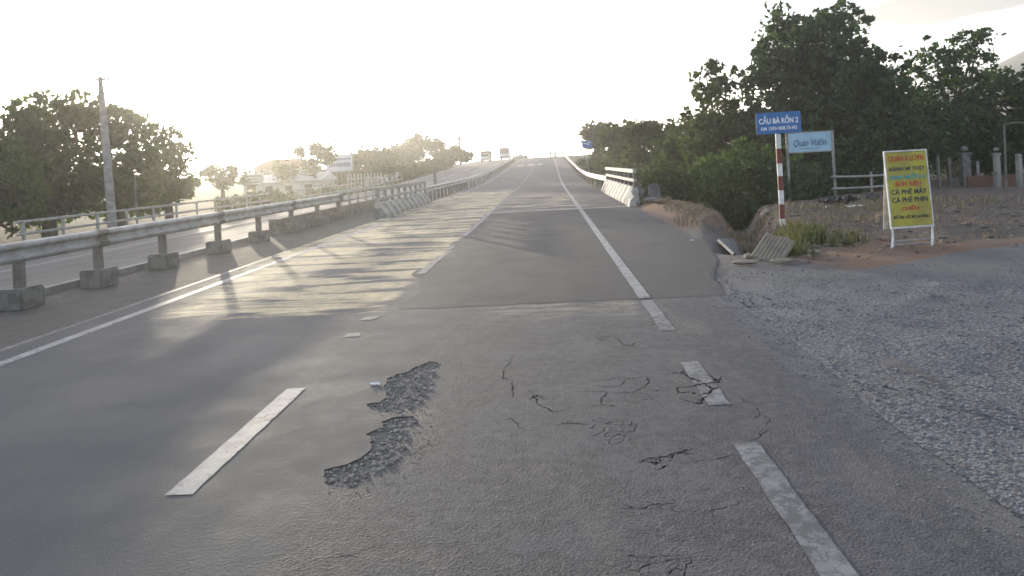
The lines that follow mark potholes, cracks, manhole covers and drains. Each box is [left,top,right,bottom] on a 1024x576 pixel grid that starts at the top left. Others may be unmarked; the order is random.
crack [490,358,737,470]
crack [741,395,771,440]
crack [623,499,679,512]
crack [625,555,692,576]
pothole [367,361,465,415]
pothole [324,412,450,495]
